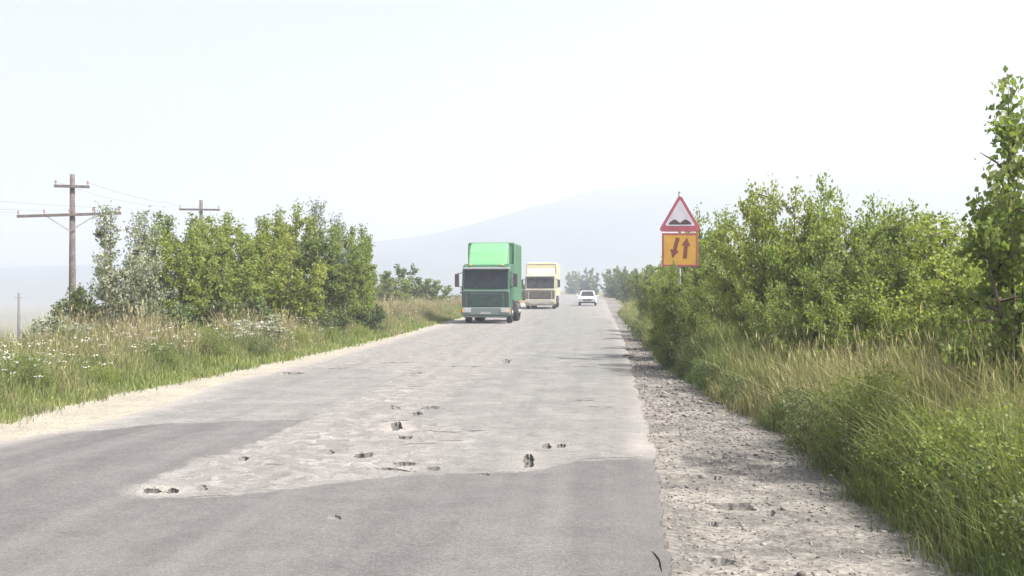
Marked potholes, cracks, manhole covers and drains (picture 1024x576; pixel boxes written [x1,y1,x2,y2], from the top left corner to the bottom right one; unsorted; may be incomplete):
pothole [523,454,534,468]
crack [405,430,484,445]
